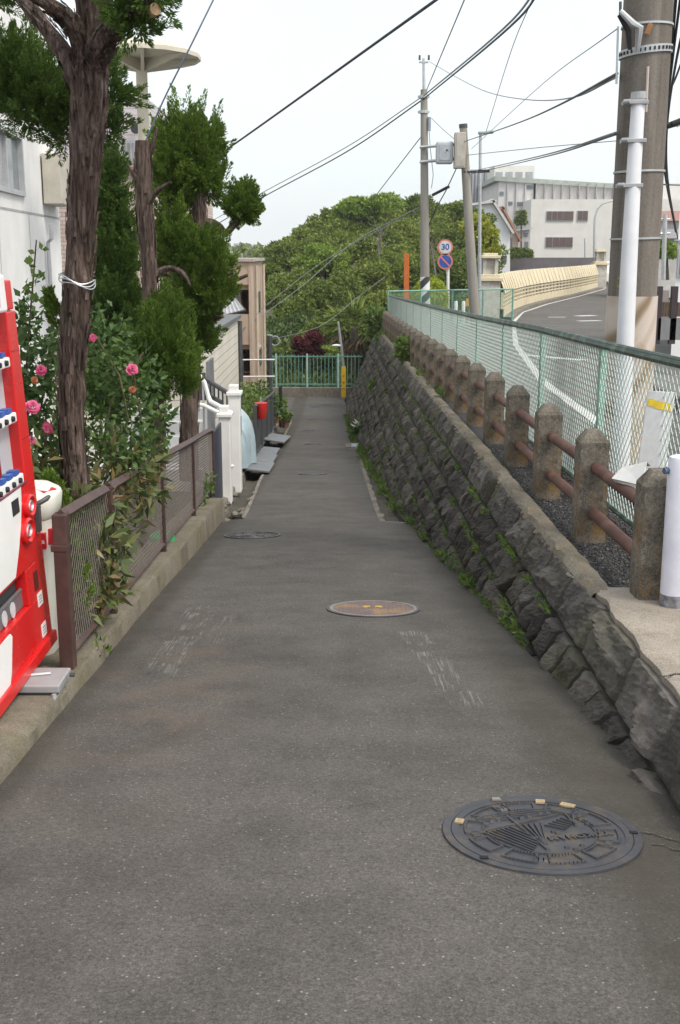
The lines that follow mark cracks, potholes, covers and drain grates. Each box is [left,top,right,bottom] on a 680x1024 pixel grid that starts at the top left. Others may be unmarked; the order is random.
manhole cover [326,600,420,618]
manhole cover [224,531,281,539]
manhole cover [442,796,643,877]
crack [640,831,680,850]
